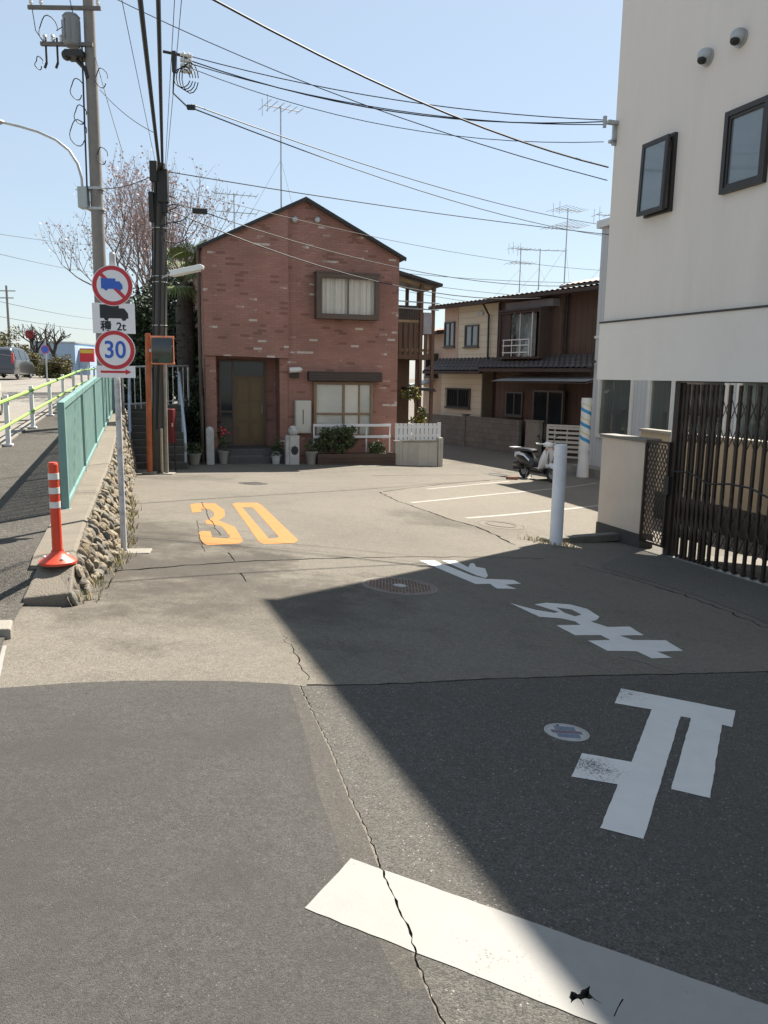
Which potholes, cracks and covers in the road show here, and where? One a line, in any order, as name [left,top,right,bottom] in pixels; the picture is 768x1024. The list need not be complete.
manhole cover [544,723,590,742]
manhole cover [475,520,527,530]
crack [196,502,221,552]
crack [284,636,446,1024]
manhole cover [362,577,438,595]
pothole [569,986,602,1005]
